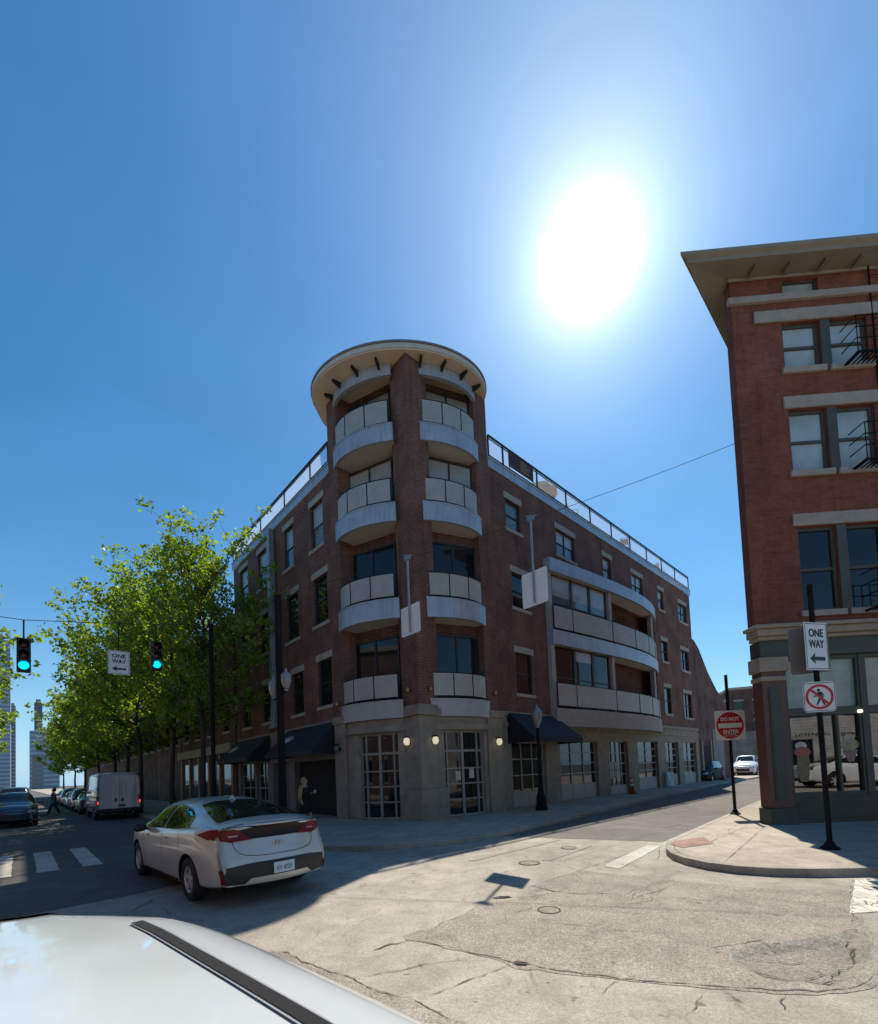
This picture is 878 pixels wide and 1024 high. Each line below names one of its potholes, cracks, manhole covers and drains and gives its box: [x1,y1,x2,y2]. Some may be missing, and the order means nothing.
crack [271,939,877,1023]
manhole cover [537,906,561,914]
